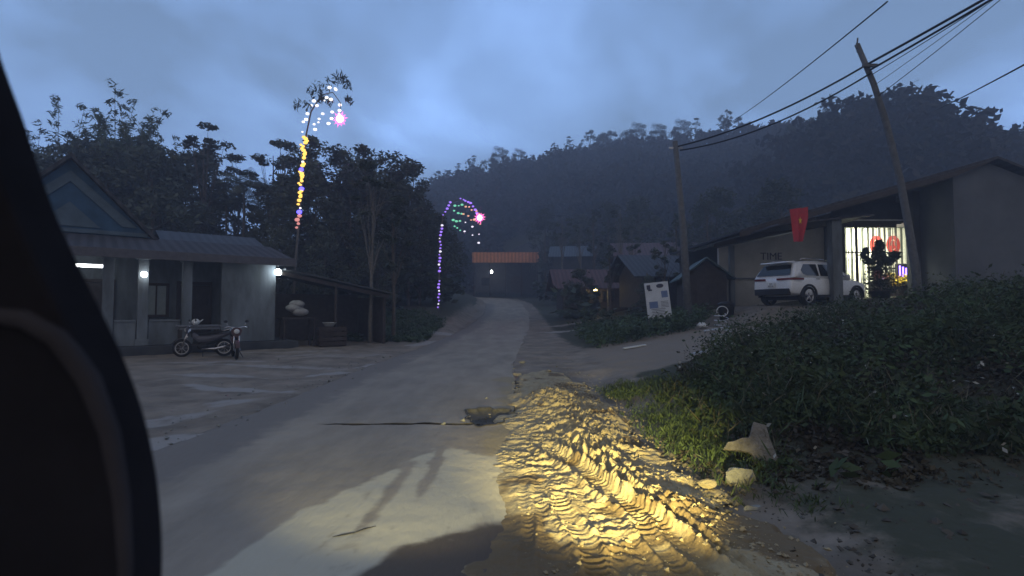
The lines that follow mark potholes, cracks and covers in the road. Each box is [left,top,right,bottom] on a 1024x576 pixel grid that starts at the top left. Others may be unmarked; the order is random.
pothole [464,407,518,427]
